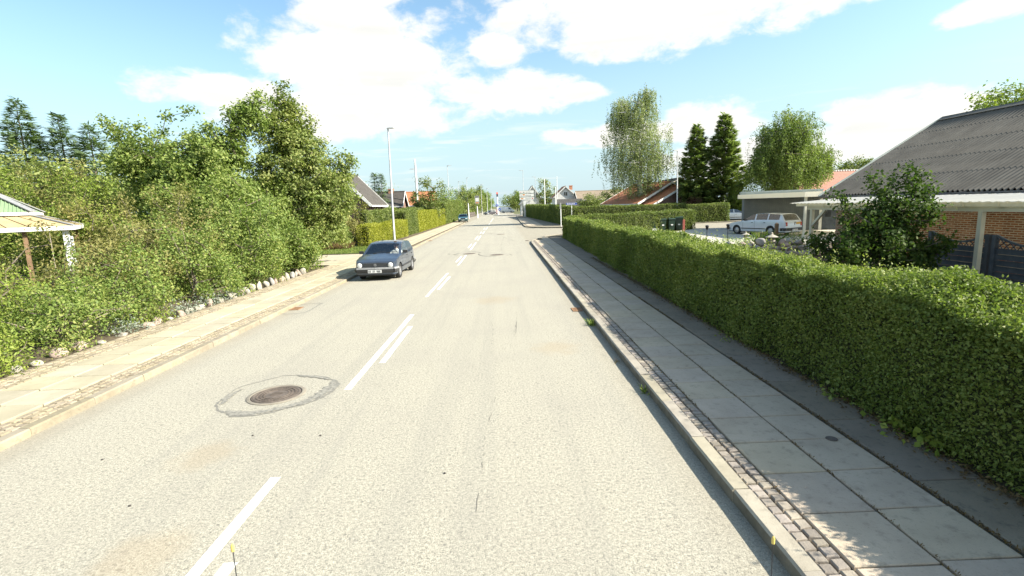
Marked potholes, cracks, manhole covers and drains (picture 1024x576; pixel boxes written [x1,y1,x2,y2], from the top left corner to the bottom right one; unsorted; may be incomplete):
manhole cover [246,385,306,405]
